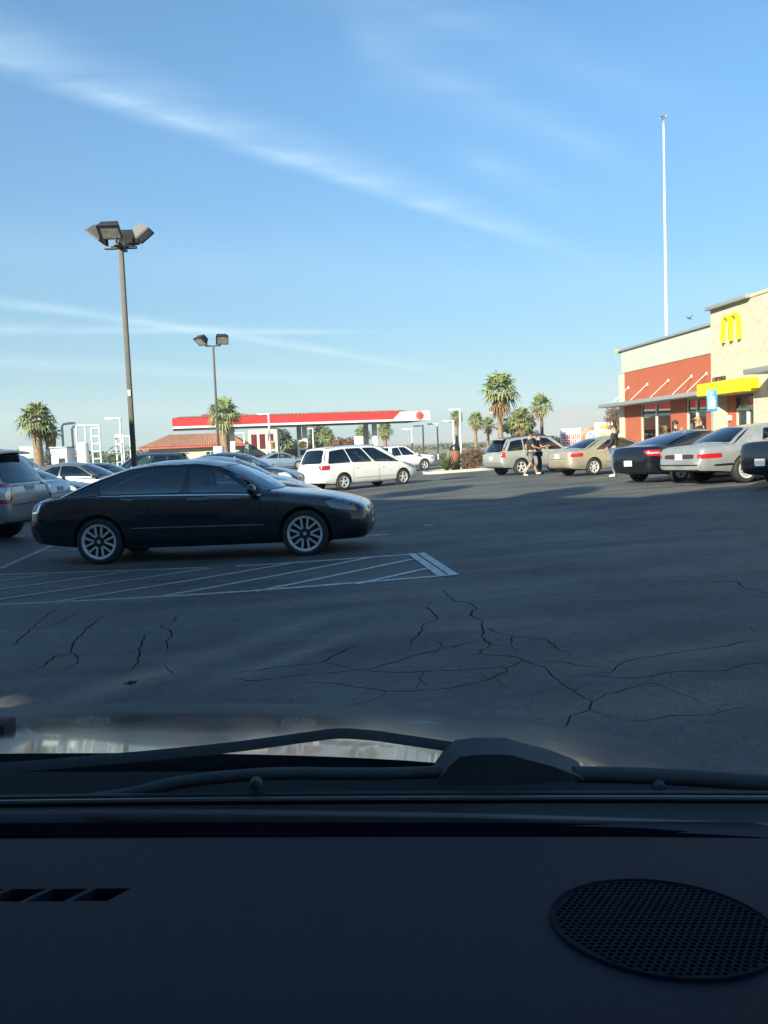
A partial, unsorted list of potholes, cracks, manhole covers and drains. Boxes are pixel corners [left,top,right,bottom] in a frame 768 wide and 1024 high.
crack [117,615,180,676]
crack [13,610,103,672]
crack [657,580,768,594]
crack [238,590,768,734]
